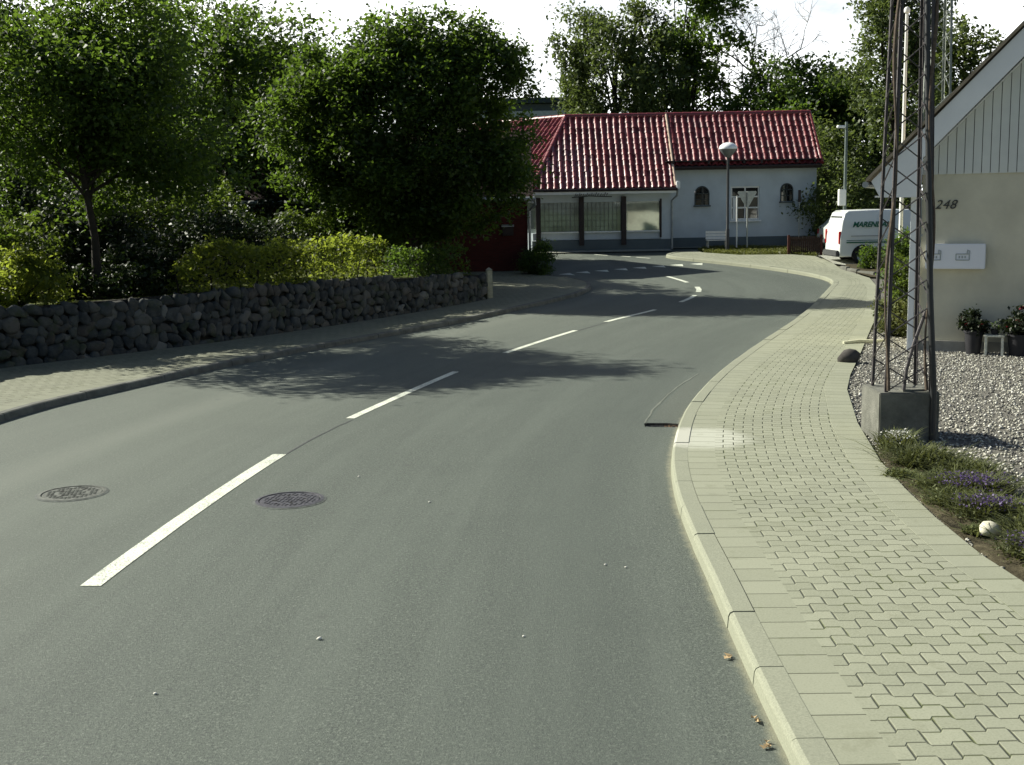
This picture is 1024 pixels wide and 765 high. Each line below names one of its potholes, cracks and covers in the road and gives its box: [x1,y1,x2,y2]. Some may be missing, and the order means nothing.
manhole cover [252,491,327,510]
manhole cover [34,485,110,502]
